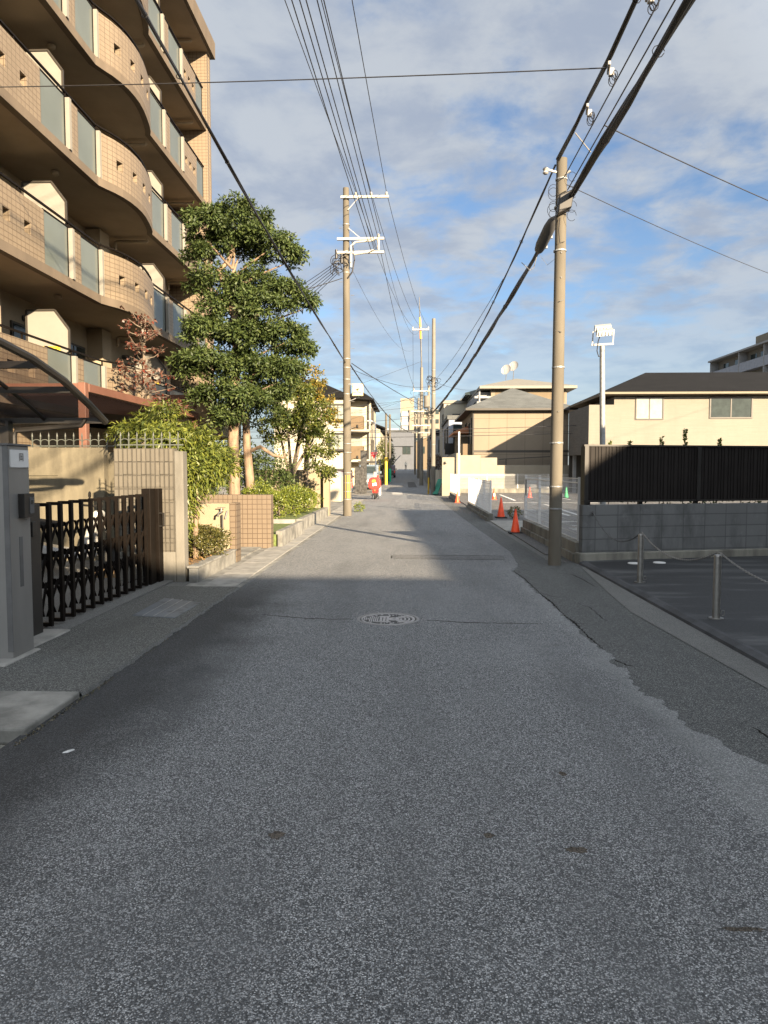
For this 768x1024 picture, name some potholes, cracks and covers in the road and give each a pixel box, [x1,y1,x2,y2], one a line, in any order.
manhole cover [357,612,419,626]
crack [427,572,631,666]
